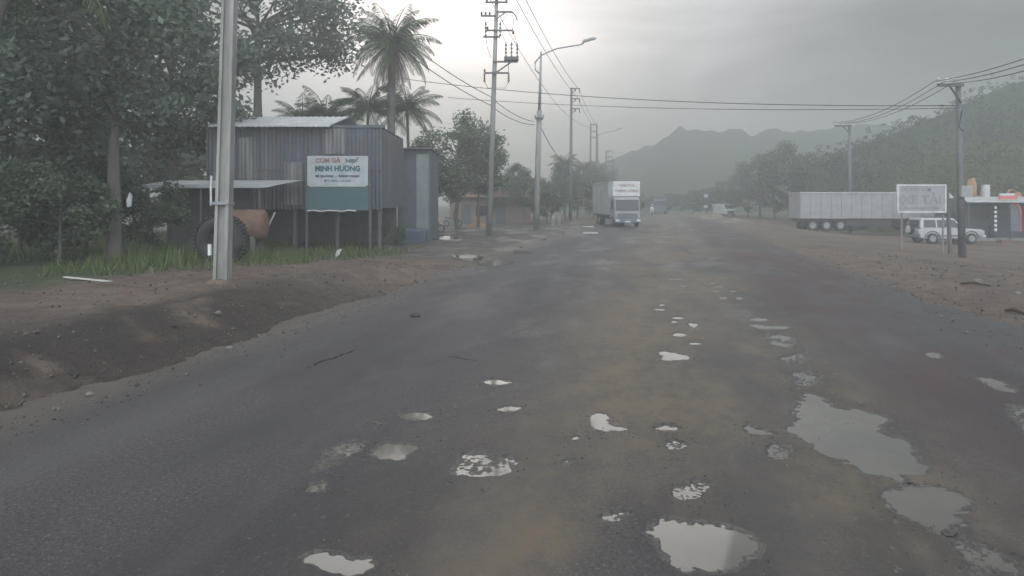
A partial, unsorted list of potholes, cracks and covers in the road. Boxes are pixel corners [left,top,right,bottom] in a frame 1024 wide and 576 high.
pothole [298,548,379,576]
pothole [397,411,436,421]
pothole [759,333,797,347]
pothole [874,480,979,537]
crack [307,350,354,368]
pothole [784,370,823,386]
pothole [669,477,713,500]
pothole [779,392,936,484]
pothole [448,451,524,477]
pothole [640,515,767,575]
pothole [741,421,776,435]
pothole [367,441,421,461]
